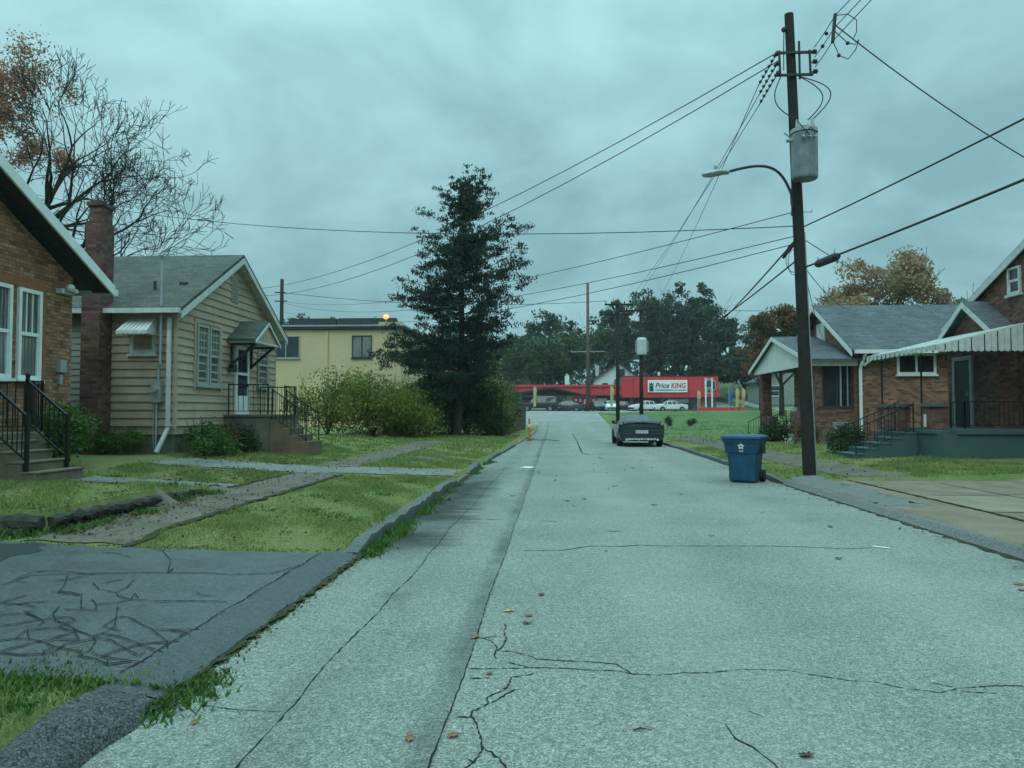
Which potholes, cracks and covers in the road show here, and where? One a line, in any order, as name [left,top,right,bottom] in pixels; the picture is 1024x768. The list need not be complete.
crack [455,623,1024,768]
crack [0,542,340,665]
